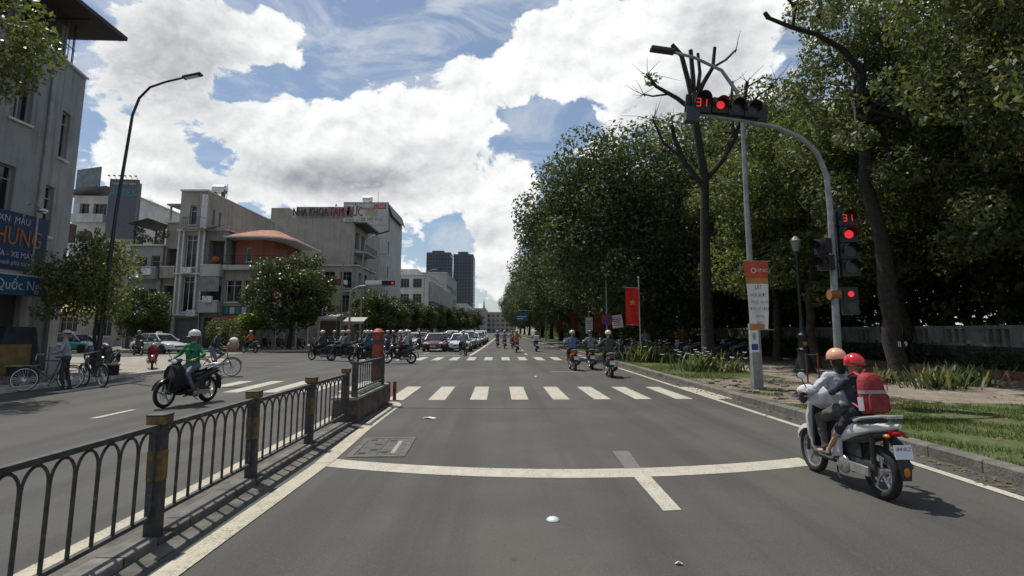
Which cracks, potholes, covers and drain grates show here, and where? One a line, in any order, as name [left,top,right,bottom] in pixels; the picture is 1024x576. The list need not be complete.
manhole cover [345,437,416,458]
